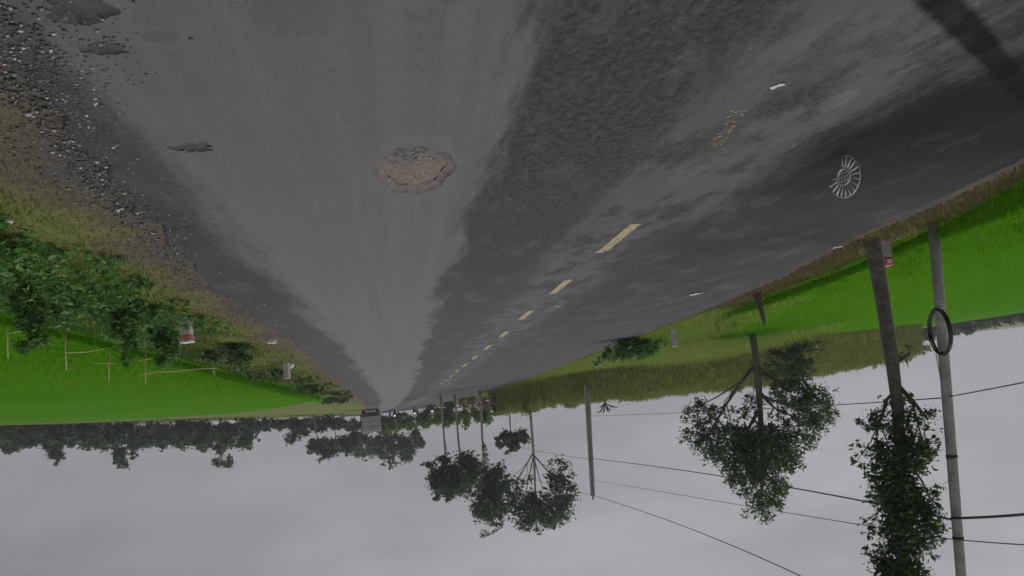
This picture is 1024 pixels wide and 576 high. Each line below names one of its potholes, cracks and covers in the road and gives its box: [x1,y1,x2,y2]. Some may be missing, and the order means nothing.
pothole [72,39,136,57]
pothole [36,0,132,30]
pothole [356,137,468,199]
pothole [158,141,219,154]
